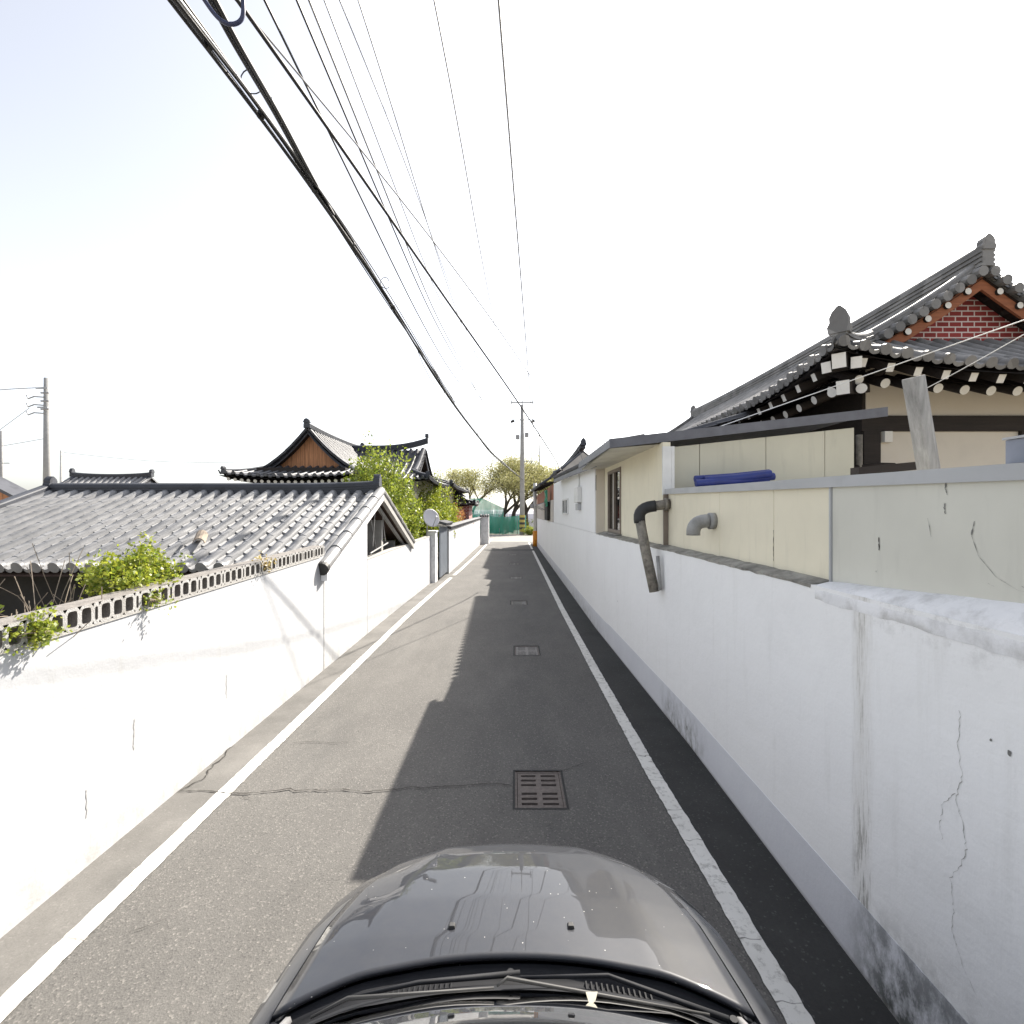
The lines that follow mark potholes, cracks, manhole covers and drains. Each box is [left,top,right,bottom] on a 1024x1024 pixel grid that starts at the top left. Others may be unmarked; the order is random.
crack [181,747,513,798]
